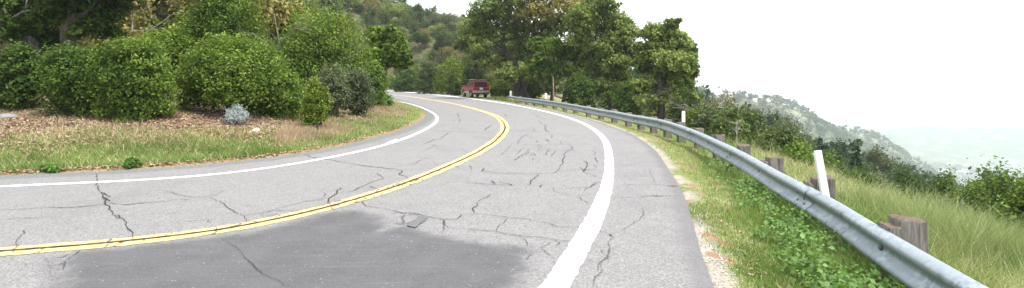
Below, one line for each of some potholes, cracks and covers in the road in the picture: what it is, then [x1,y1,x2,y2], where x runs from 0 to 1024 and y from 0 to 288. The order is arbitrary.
crack [1,175,252,270]
crack [243,113,673,288]
